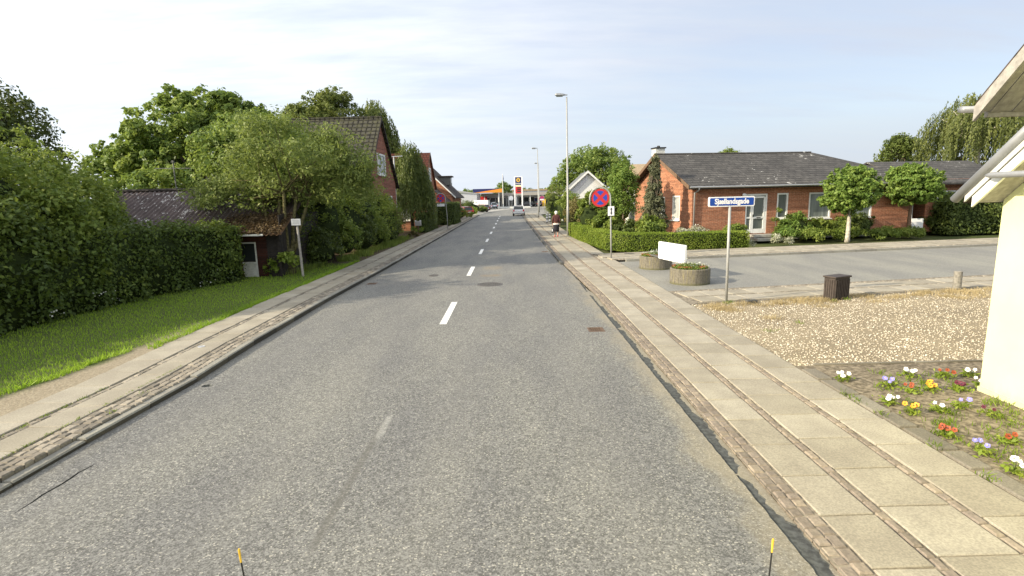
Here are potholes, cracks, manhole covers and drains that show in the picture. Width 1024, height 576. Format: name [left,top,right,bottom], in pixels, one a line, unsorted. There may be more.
crack [15,463,96,513]
